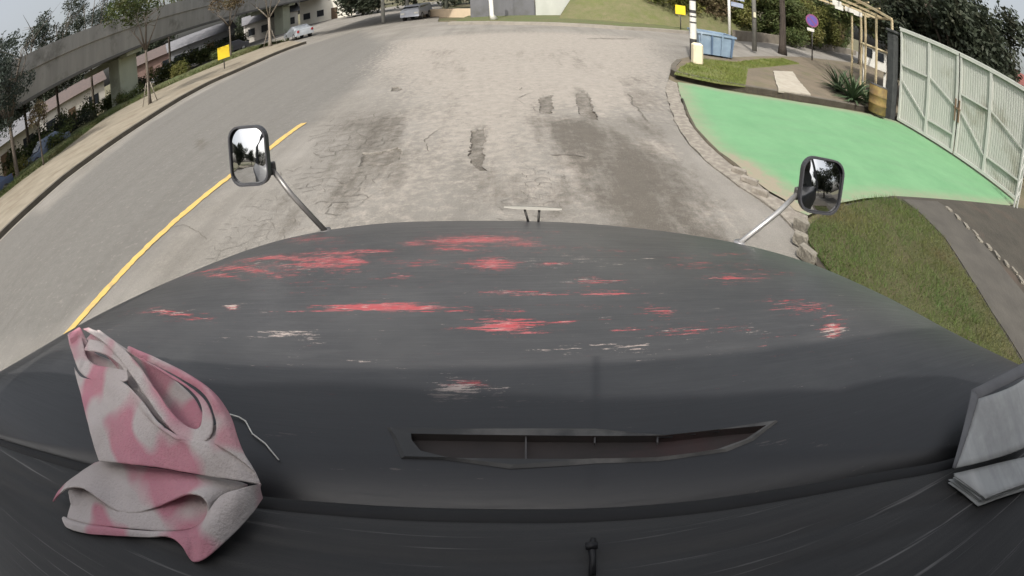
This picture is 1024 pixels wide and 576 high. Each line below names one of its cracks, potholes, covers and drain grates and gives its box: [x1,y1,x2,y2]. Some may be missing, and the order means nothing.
pothole [538,95,554,114]
pothole [575,90,598,120]
pothole [467,127,488,171]
crack [174,110,411,260]
crack [497,154,584,221]
